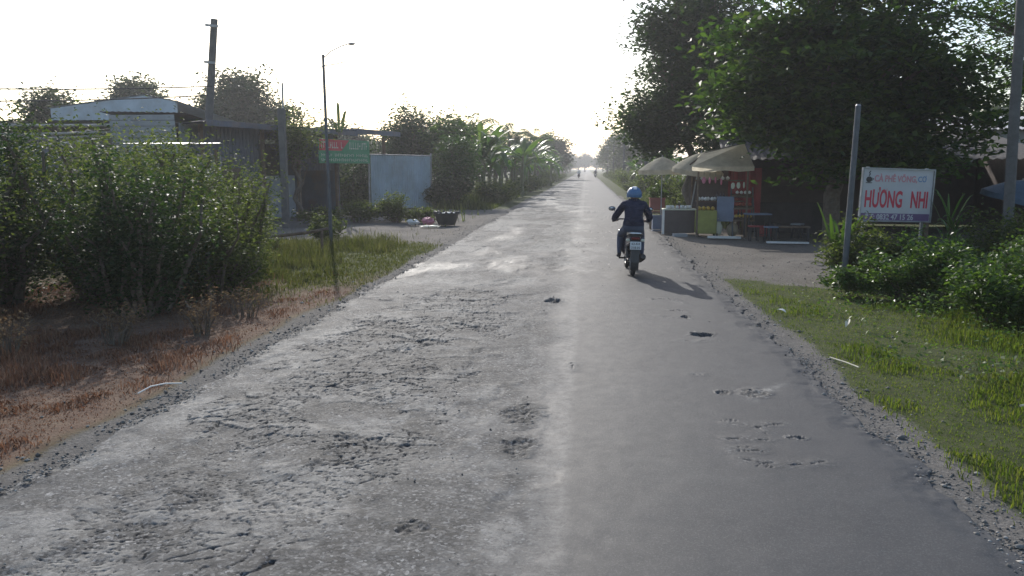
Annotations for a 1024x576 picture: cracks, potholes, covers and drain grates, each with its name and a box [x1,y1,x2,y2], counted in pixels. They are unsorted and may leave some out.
pothole [499,436,537,458]
crack [188,503,275,576]
pothole [498,401,542,428]
pothole [741,389,771,398]
pothole [390,517,440,537]
